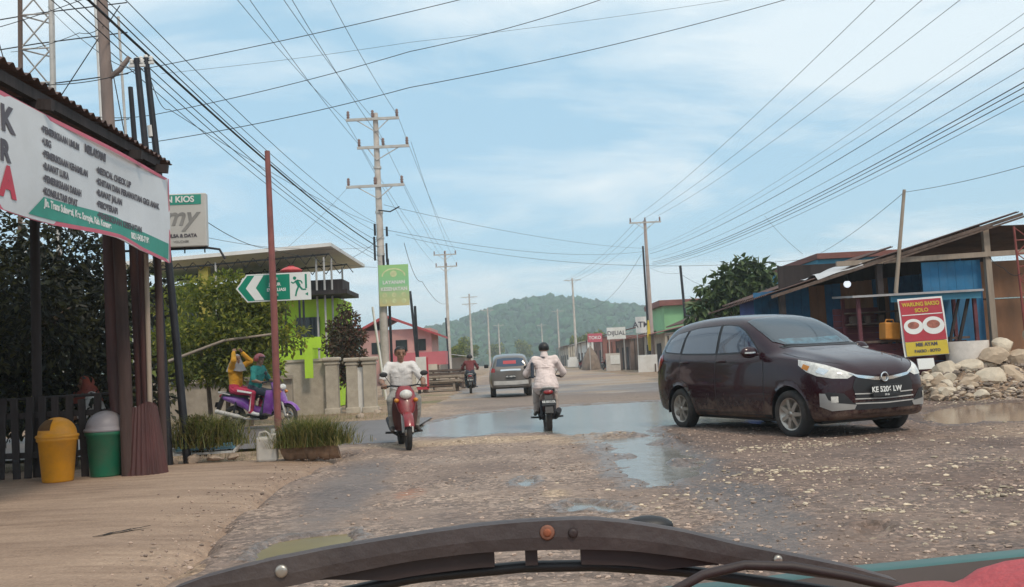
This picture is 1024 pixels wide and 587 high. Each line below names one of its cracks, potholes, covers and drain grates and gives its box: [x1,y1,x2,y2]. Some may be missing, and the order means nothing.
pothole [547,498,643,515]
